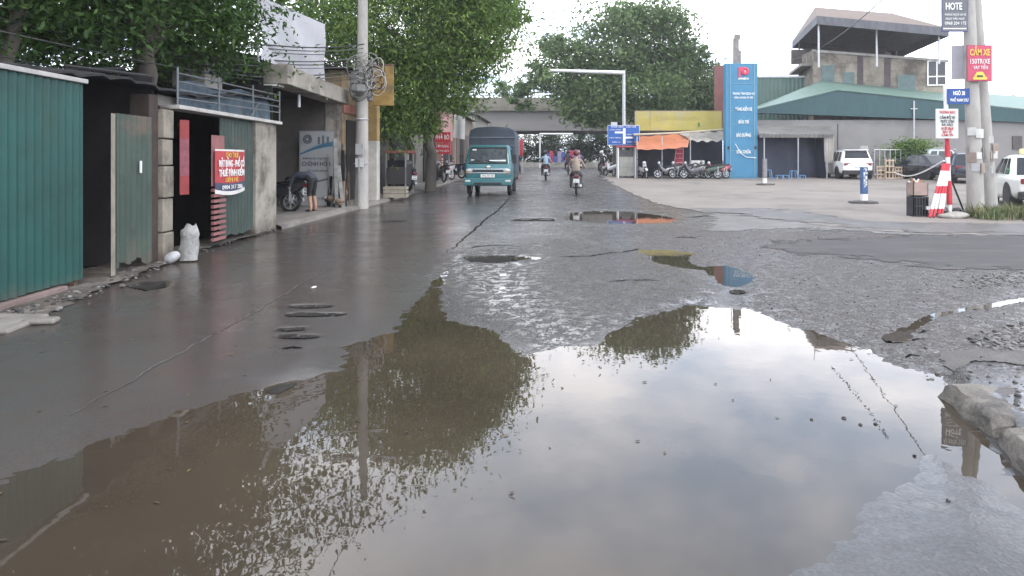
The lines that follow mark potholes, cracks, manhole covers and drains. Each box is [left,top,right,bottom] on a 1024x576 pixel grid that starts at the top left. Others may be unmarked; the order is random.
pothole [126,281,166,291]
crack [447,198,510,251]
pothole [266,382,297,393]
pothole [463,255,516,263]
